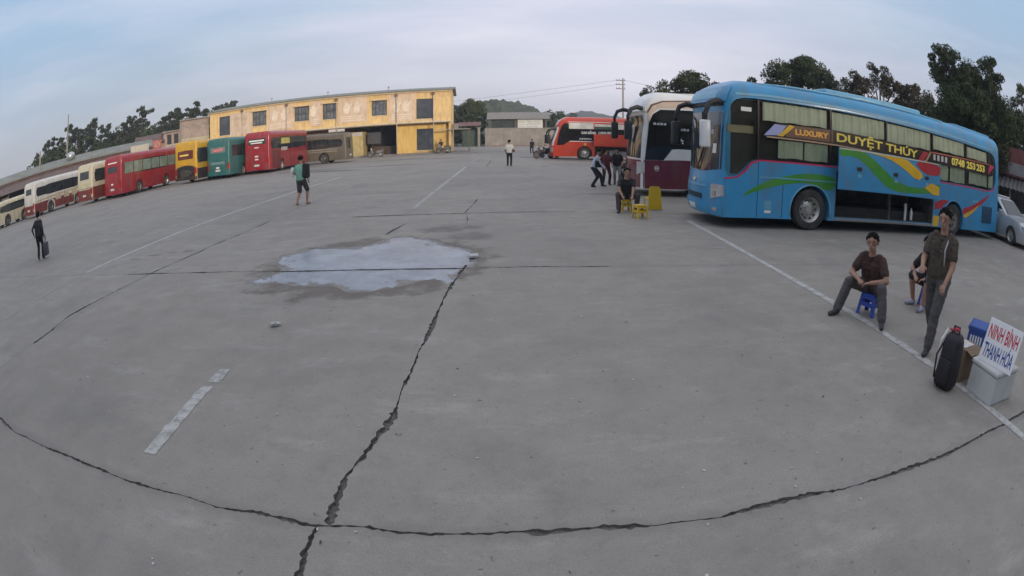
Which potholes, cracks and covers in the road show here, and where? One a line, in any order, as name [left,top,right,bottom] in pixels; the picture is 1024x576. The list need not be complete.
crack [358,200,502,235]
crack [0,265,1024,576]
